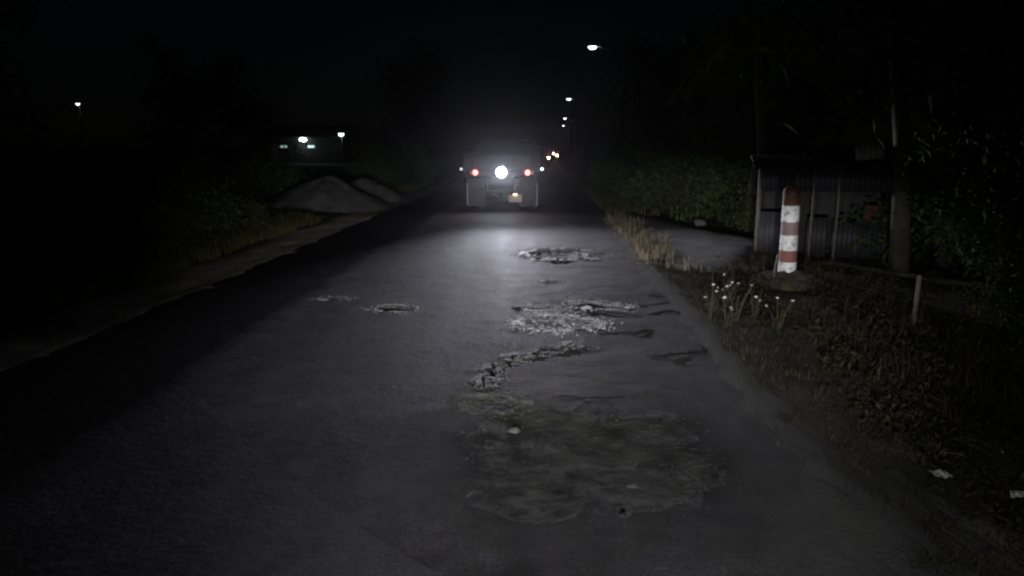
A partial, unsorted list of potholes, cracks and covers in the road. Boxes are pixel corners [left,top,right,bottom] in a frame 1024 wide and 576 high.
pothole [557,297,637,313]
pothole [311,295,356,303]
crack [595,294,707,360]
pothole [495,310,623,338]
pothole [506,246,613,265]
pothole [361,304,427,315]
